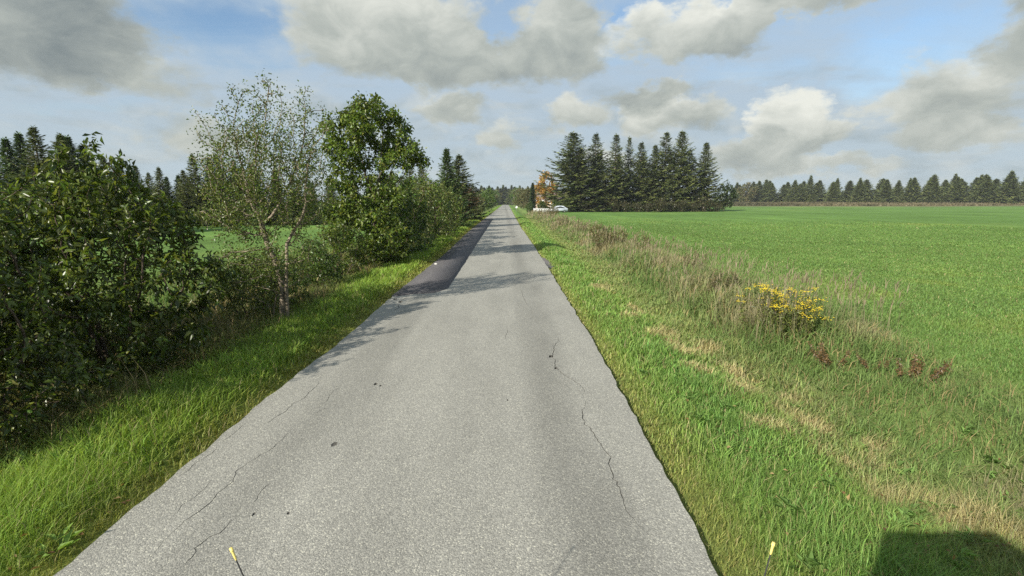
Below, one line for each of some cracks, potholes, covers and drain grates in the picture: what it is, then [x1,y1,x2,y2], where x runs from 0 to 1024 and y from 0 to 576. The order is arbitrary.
crack [181,383,331,475]
crack [551,339,652,538]
crack [154,428,293,566]
